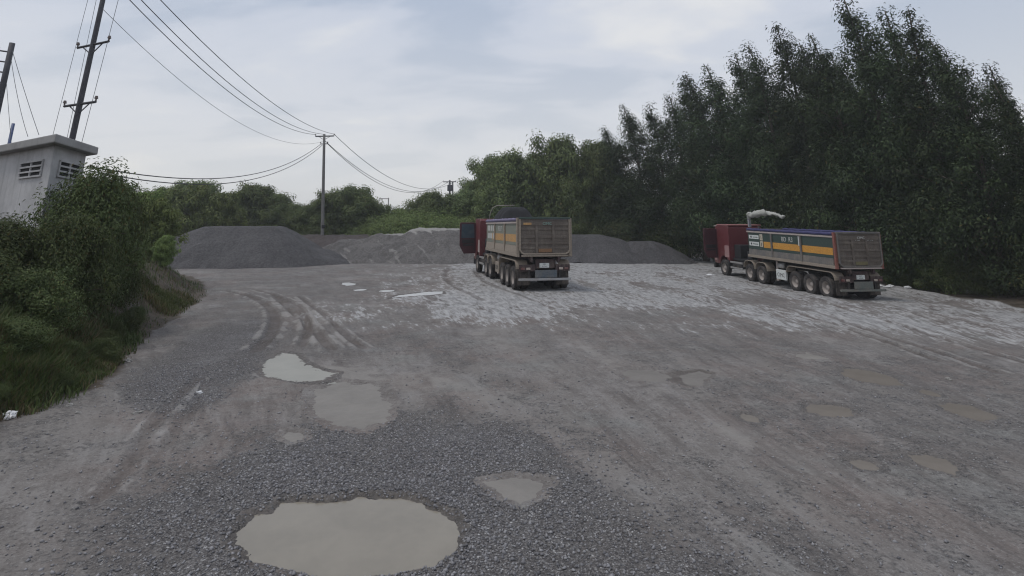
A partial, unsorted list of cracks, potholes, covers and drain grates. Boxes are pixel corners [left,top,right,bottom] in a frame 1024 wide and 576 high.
pothole [255,351,344,385]
pothole [731,410,769,425]
pothole [797,401,862,419]
pothole [300,378,402,435]
pothole [838,454,891,474]
pothole [910,387,949,399]
pothole [929,399,1006,424]
pothole [219,489,471,576]
pothole [473,470,561,509]
pothole [896,449,971,478]
pothole [834,366,911,389]
pothole [664,369,716,388]
